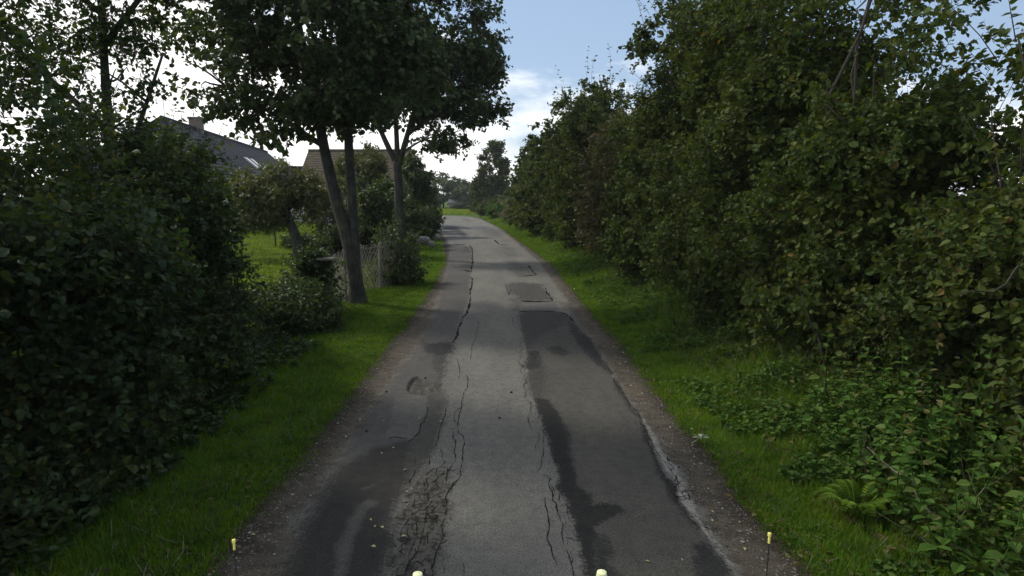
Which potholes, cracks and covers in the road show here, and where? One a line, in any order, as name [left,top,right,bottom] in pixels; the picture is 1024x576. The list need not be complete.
crack [640,422,728,559]
crack [387,377,468,576]
crack [453,244,479,377]
pothole [405,376,445,395]
crack [520,343,575,576]
